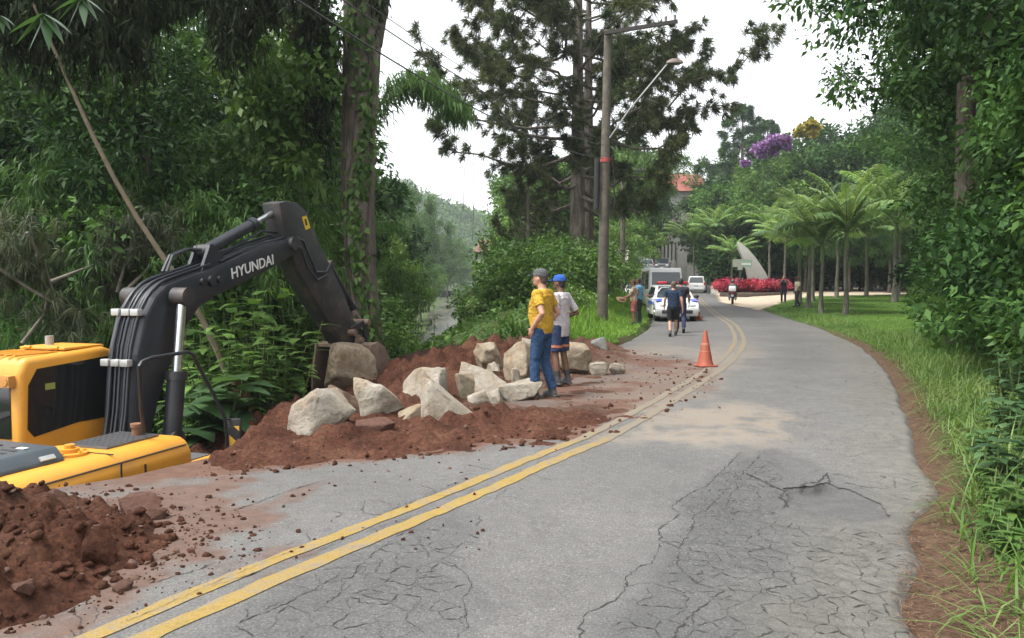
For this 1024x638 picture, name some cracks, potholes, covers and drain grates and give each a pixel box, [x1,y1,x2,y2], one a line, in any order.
pothole [783,482,891,522]
crack [577,453,938,638]
